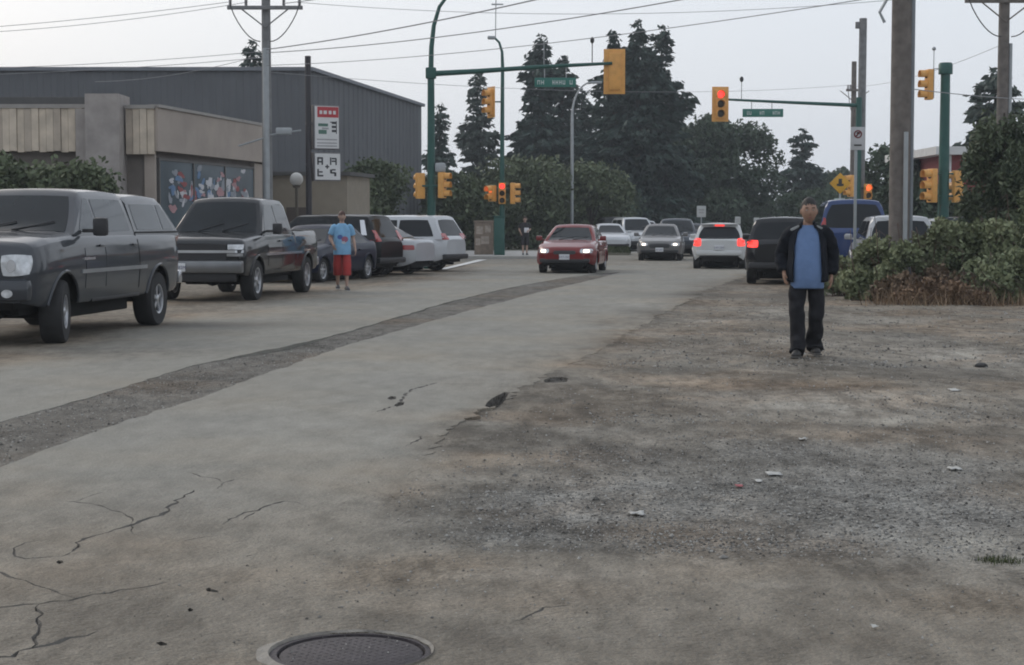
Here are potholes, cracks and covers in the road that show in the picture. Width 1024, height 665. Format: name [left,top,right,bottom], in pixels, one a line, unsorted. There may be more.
crack [0,472,300,658]
crack [377,383,435,412]
manhole cover [256,629,434,665]
pothole [486,392,510,408]
